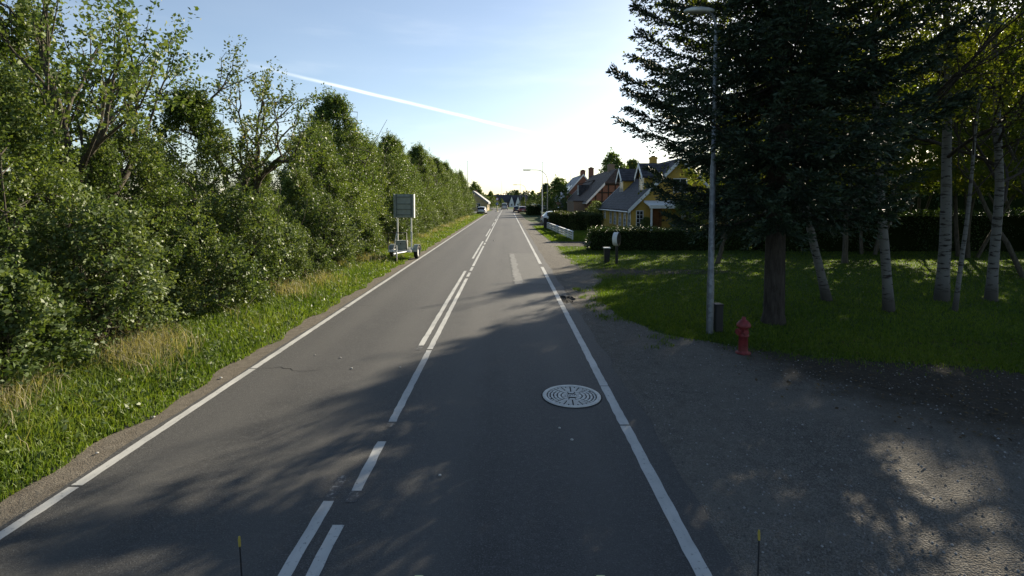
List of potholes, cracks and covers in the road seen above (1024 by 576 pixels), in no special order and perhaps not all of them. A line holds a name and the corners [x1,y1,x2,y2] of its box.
manhole cover [541,385,602,408]
